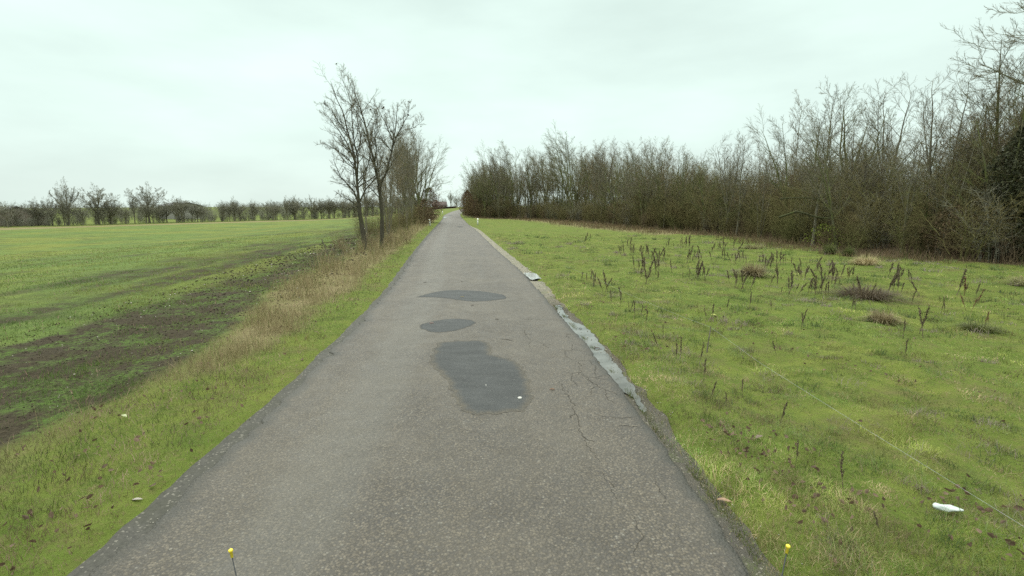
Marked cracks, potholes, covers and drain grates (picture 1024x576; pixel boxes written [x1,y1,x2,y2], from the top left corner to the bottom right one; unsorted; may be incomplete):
crack [506,319,640,453]
